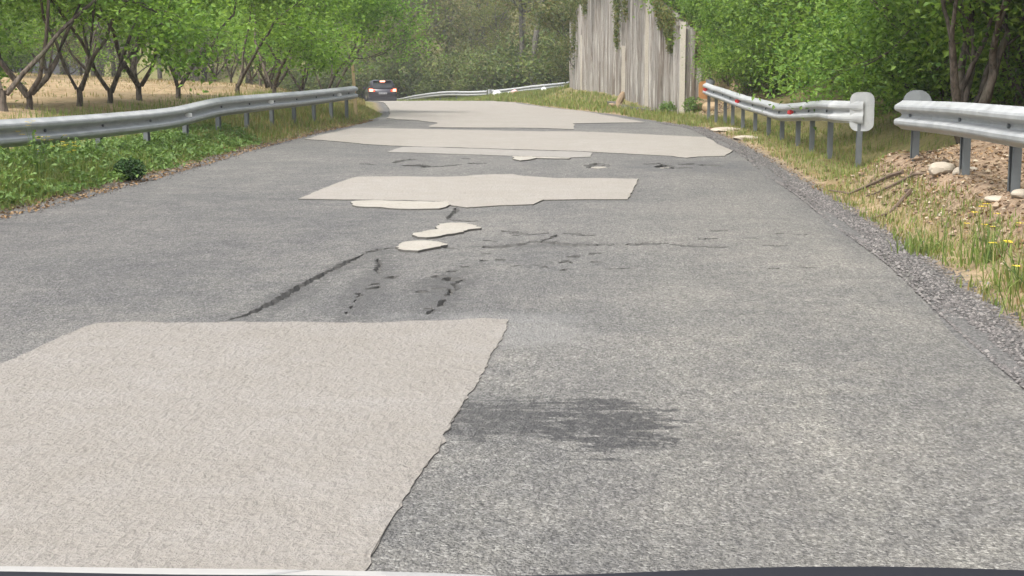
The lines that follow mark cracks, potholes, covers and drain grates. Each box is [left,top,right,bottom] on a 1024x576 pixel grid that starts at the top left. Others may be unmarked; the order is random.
crack [416,230,727,315]
crack [446,208,474,222]
